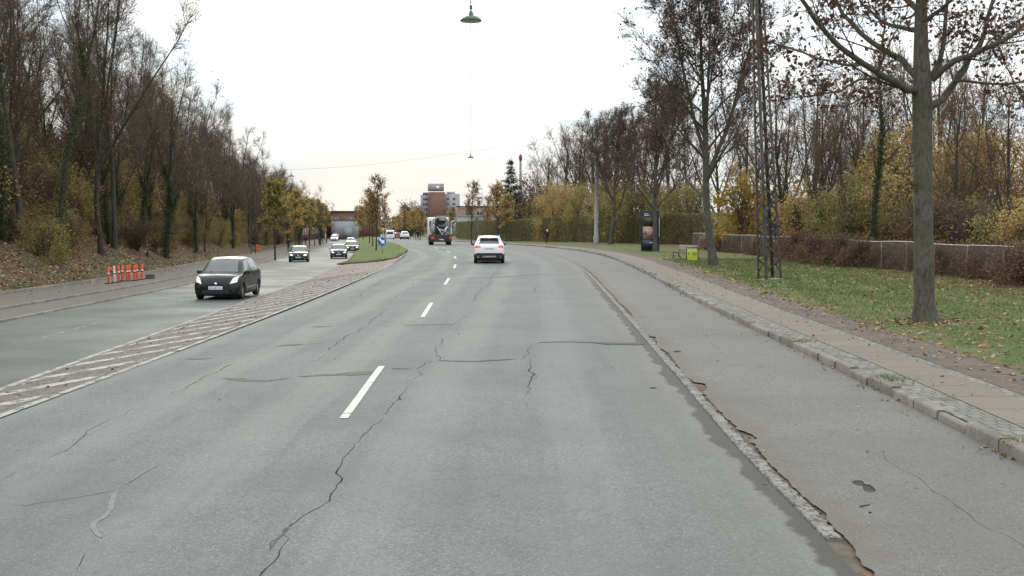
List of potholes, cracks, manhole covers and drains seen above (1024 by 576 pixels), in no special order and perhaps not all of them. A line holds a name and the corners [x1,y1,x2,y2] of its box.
crack [885,459,1023,546]
pothole [851,480,876,492]
crack [8,273,644,576]
